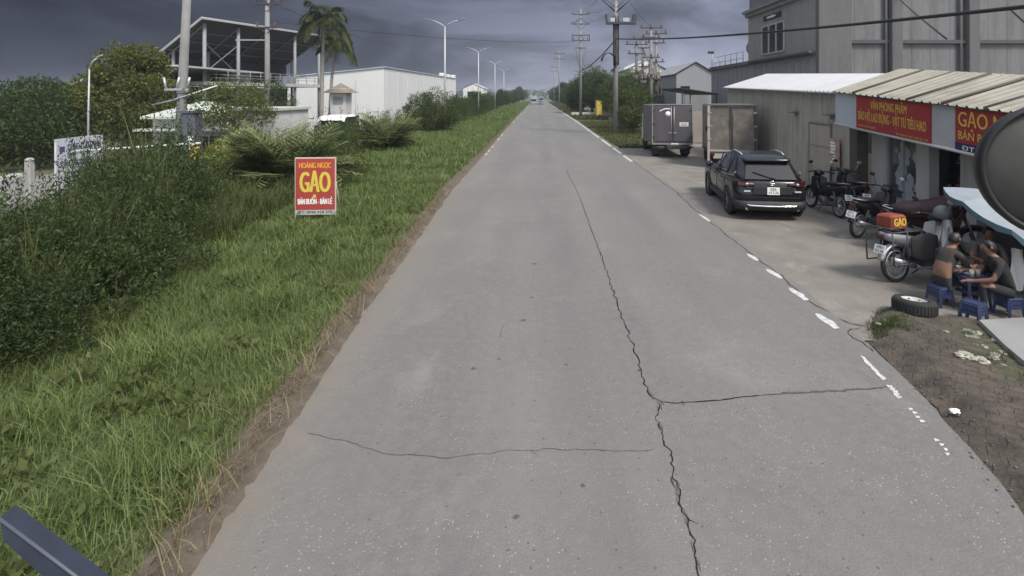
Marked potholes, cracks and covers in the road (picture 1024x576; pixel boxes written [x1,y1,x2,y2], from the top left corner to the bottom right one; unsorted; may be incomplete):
crack [311,175,887,576]
